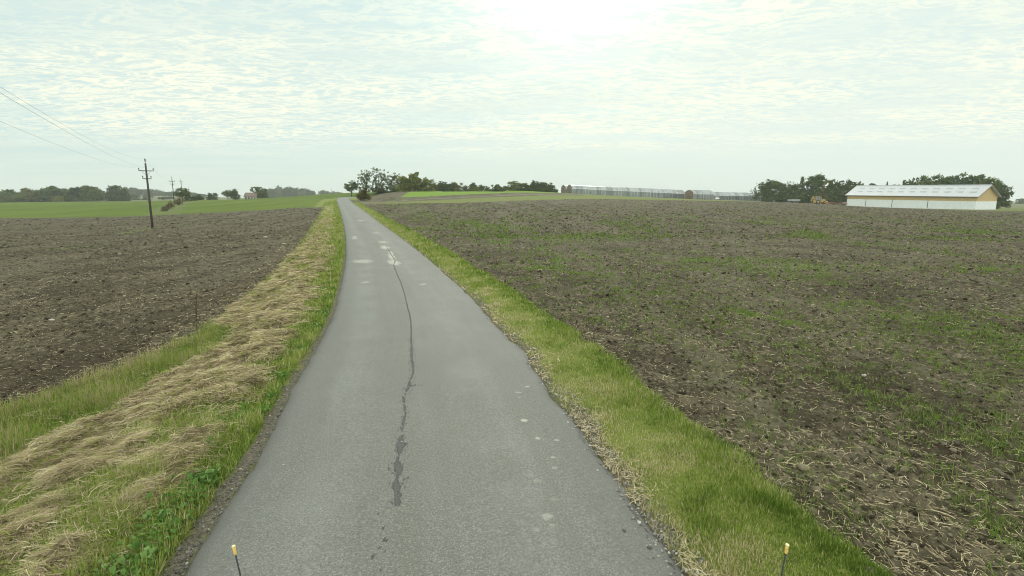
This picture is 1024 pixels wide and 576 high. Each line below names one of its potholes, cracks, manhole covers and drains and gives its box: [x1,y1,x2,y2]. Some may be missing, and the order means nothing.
crack [371,246,417,572]
